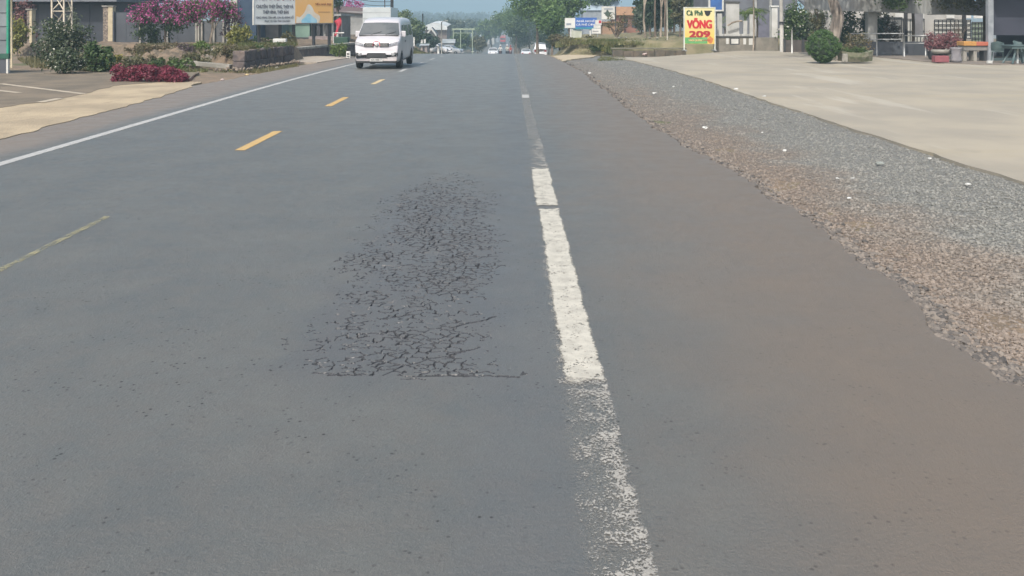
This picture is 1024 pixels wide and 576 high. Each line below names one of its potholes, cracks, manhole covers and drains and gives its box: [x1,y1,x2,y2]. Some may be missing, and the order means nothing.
crack [281,172,528,380]
